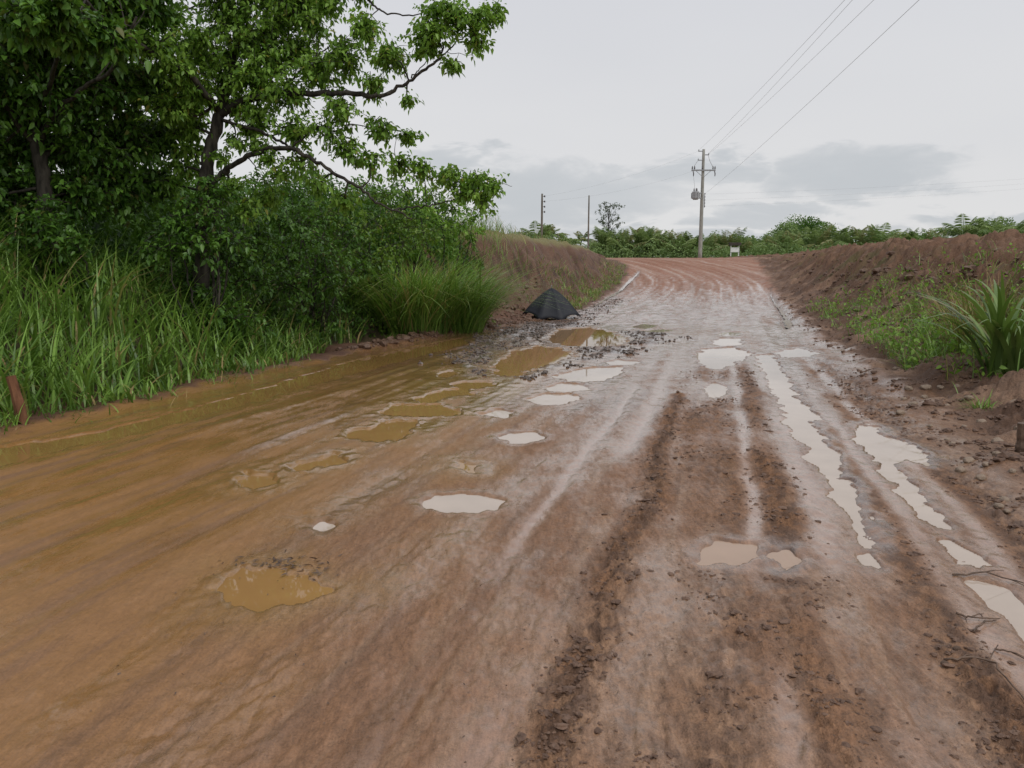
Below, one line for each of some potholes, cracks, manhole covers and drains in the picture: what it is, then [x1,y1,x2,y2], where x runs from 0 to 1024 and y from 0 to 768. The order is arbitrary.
pothole [213,467,295,493]
pothole [484,428,561,446]
pothole [193,556,361,622]
pothole [540,327,634,347]
pothole [487,345,582,377]
pothole [331,418,431,445]
pothole [673,533,795,574]
pothole [400,487,524,519]
